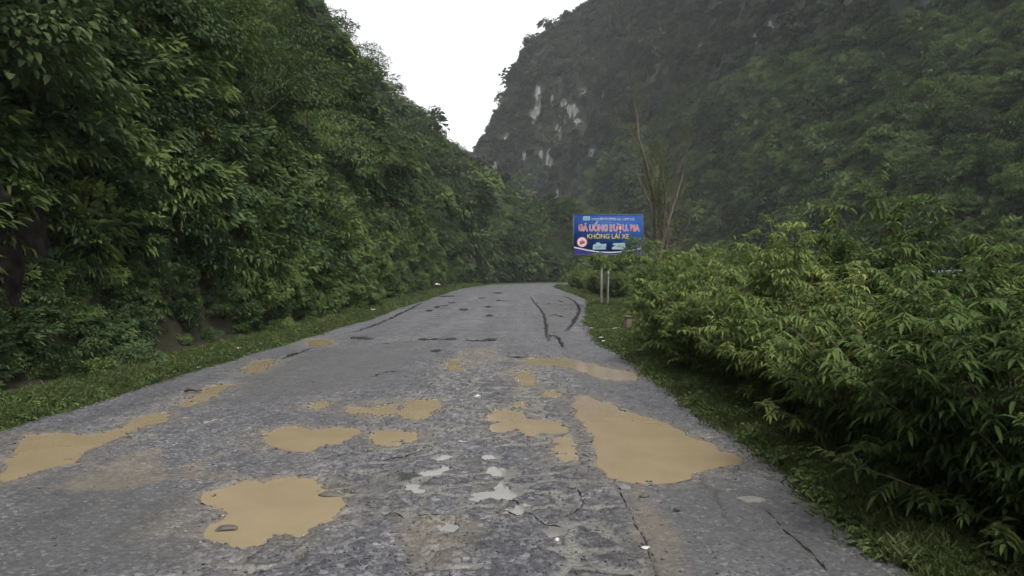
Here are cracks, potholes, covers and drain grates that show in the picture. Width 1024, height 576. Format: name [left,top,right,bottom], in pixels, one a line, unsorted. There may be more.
crack [354,303,440,344]
pothole [260,424,362,452]
pothole [568,394,747,485]
crack [765,510,827,571]
pothole [175,383,236,407]
pothole [0,413,170,482]
pothole [392,396,444,420]
crack [530,296,581,346]
crack [616,485,656,572]
pothole [478,408,571,436]
pothole [523,357,643,381]
pothole [236,358,276,374]
